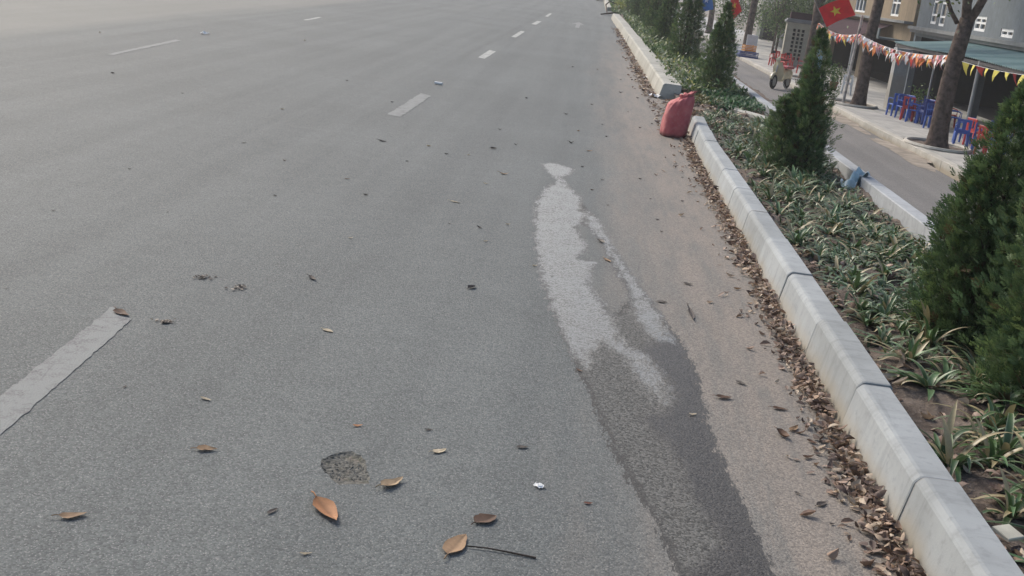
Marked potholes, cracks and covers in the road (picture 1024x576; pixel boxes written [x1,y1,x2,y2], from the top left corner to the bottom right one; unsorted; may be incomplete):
pothole [320,451,371,485]
